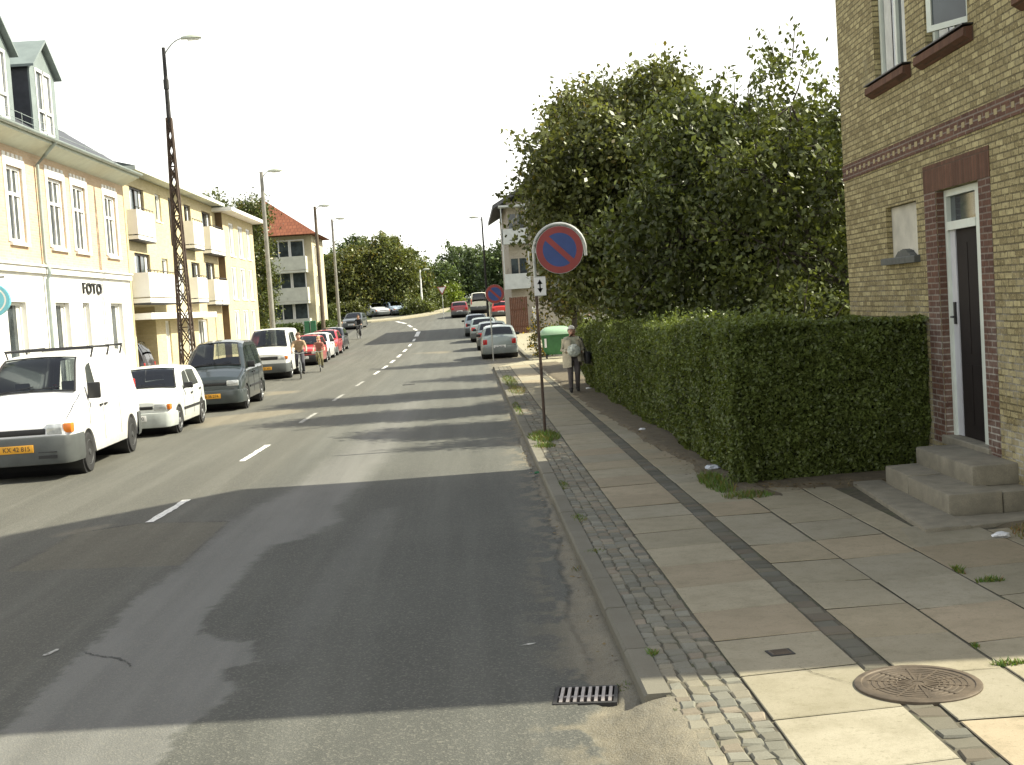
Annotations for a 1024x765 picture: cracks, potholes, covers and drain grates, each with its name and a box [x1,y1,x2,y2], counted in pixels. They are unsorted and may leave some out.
drain grate [552,685,618,707]
utility cover [765,648,796,657]
manhole cover [854,665,983,706]
